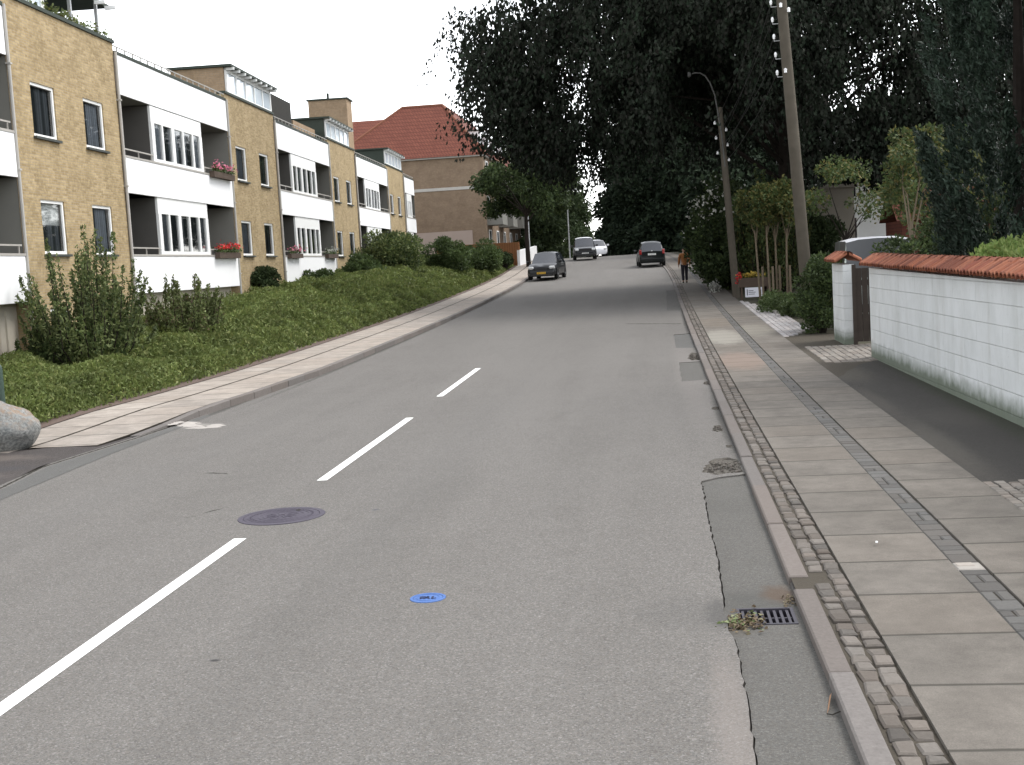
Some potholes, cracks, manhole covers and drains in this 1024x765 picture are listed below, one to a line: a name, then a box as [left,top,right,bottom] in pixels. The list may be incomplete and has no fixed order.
pothole [702,457,743,475]
crack [702,486,725,607]
drain grate [735,607,799,625]
crack [734,639,758,765]
manhole cover [238,507,325,526]
